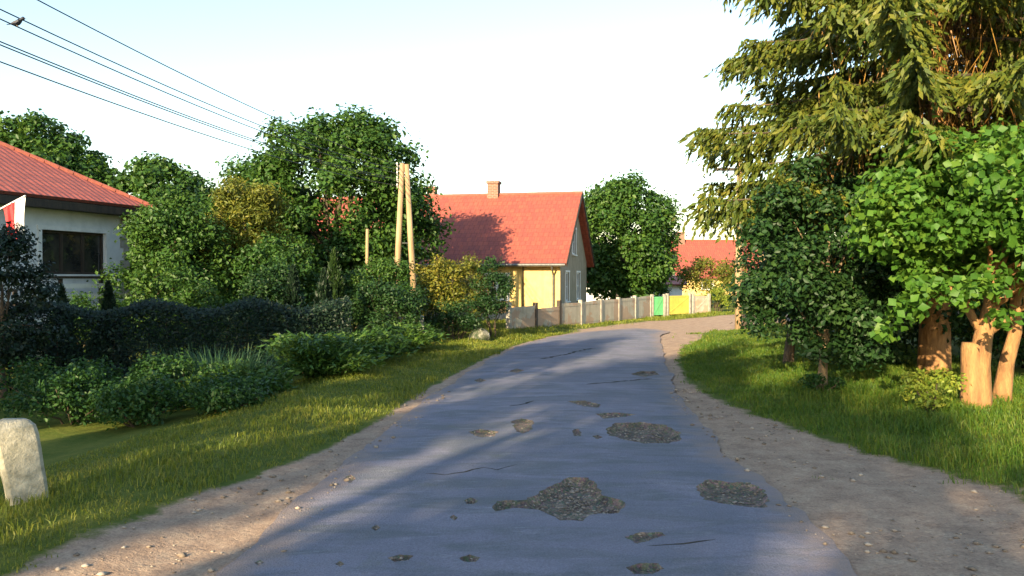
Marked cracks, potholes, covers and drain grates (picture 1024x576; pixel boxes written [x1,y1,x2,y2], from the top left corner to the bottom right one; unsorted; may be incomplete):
pothole [469,429,498,437]
pothole [605,422,682,444]
pothole [696,479,770,508]
pothole [625,532,665,544]
pothole [511,418,534,434]
pothole [459,554,481,562]
crack [425,464,517,475]
pothole [568,400,601,408]
pothole [626,563,664,574]
pothole [492,477,625,521]
